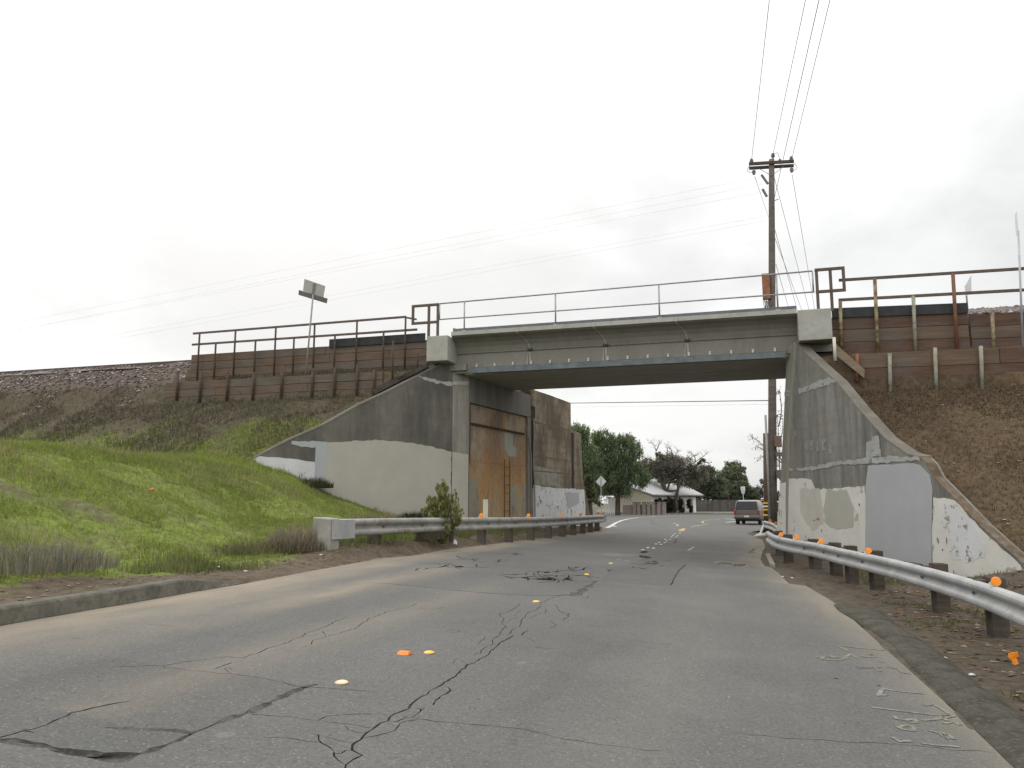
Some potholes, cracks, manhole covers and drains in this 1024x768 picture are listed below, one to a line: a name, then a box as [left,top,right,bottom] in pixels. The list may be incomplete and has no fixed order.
crack [0,597,658,768]
crack [415,553,593,583]
